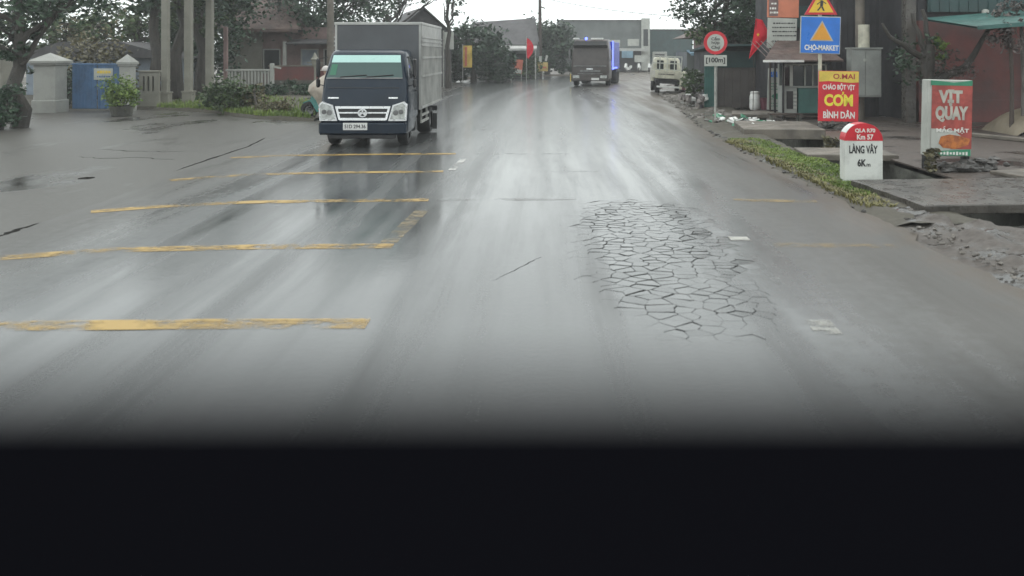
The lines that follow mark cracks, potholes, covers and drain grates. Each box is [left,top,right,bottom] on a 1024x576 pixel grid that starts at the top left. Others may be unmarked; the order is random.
crack [496,192,953,374]
crack [0,223,39,236]
crack [82,138,265,171]
